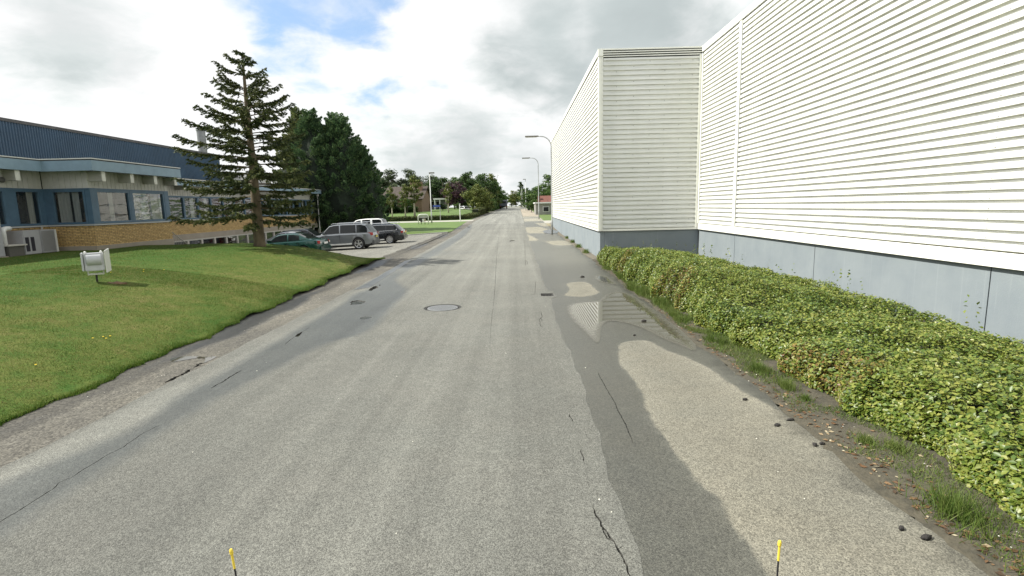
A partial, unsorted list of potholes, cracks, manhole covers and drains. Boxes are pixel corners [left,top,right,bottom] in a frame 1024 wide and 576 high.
crack [165,363,240,387]
crack [593,508,630,576]
crack [0,422,166,522]
